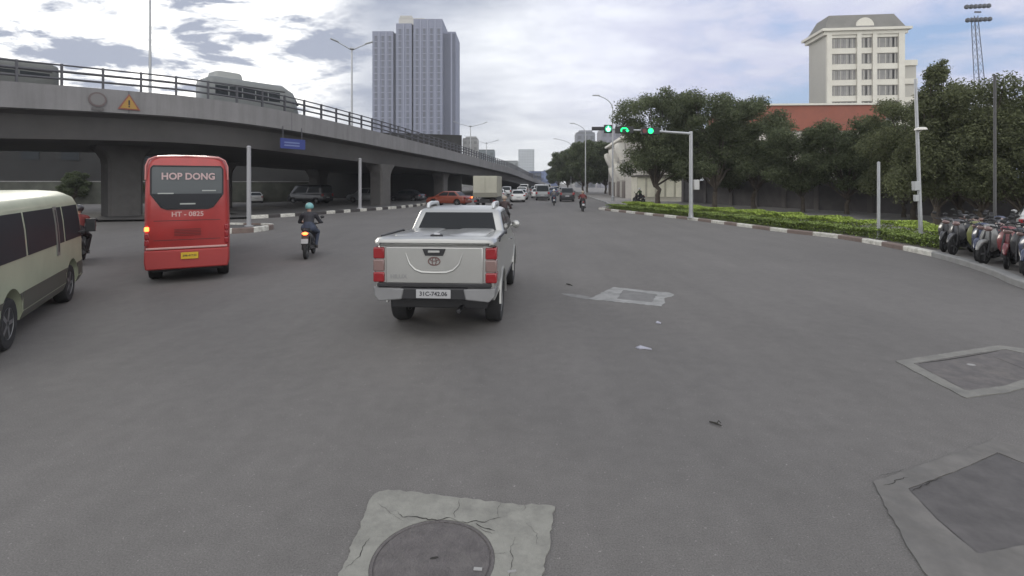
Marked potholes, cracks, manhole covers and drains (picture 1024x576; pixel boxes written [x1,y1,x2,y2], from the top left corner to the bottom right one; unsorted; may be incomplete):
crack [350,504,537,576]
manhole cover [873,439,1024,576]
manhole cover [896,345,1024,399]
manhole cover [338,490,555,576]
